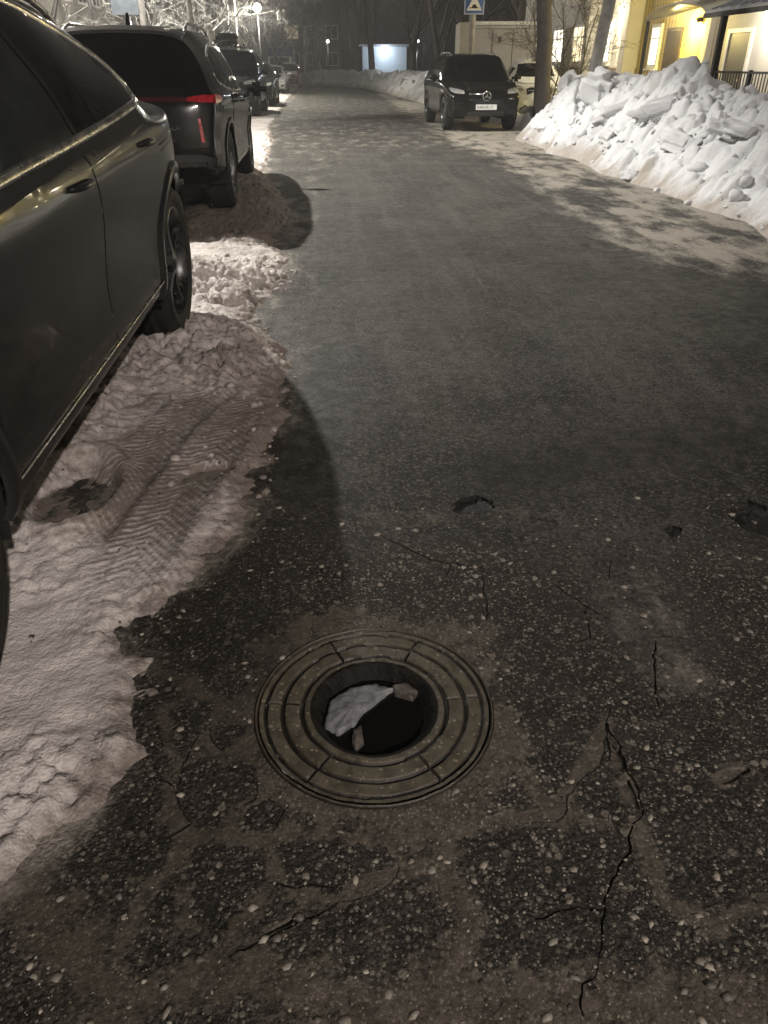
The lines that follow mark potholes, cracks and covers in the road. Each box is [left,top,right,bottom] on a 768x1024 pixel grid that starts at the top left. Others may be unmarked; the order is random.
pothole [452,495,495,515]
manhole cover [254,628,494,809]
pothole [728,500,768,536]
crack [519,635,688,1017]
crack [228,881,340,957]
crack [374,532,616,644]
pothole [665,525,683,538]
